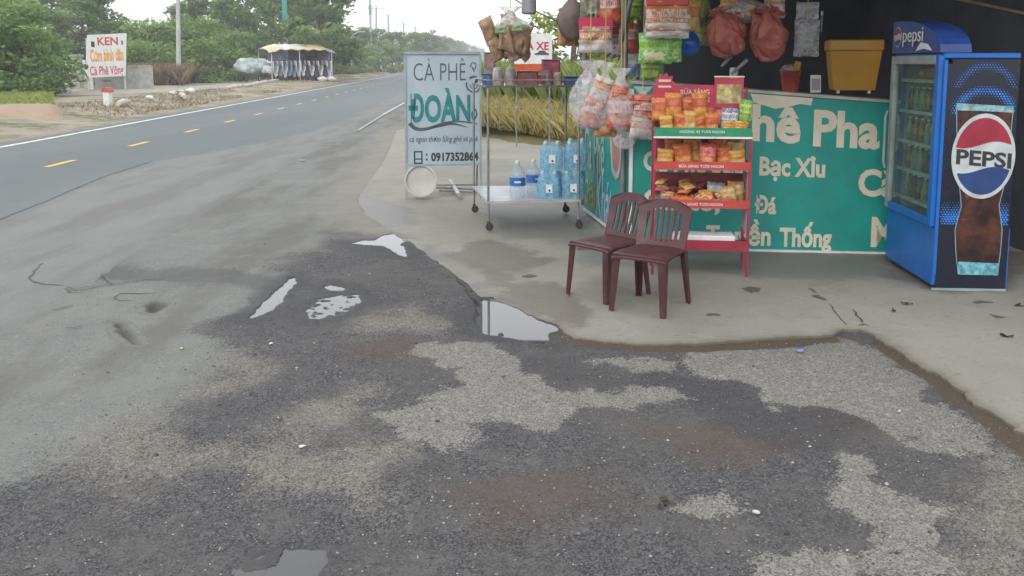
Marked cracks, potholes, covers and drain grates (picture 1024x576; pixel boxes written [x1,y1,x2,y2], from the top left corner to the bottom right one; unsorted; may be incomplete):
pothole [102,319,150,348]
crack [831,305,869,326]
crack [28,263,166,310]
pothole [134,299,176,316]
pothole [221,540,349,576]
